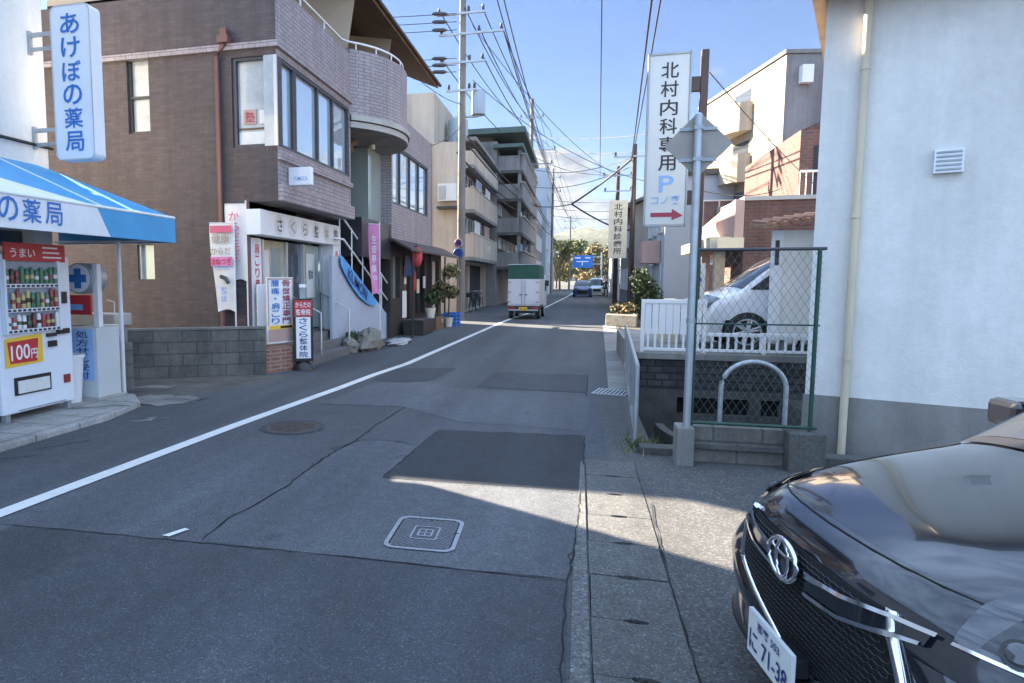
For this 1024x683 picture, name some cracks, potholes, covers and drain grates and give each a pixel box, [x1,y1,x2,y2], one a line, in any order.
manhole cover [260,420,325,435]
crack [202,404,415,539]
manhole cover [384,516,464,552]
drain grate [591,388,627,397]
crack [558,490,581,683]
